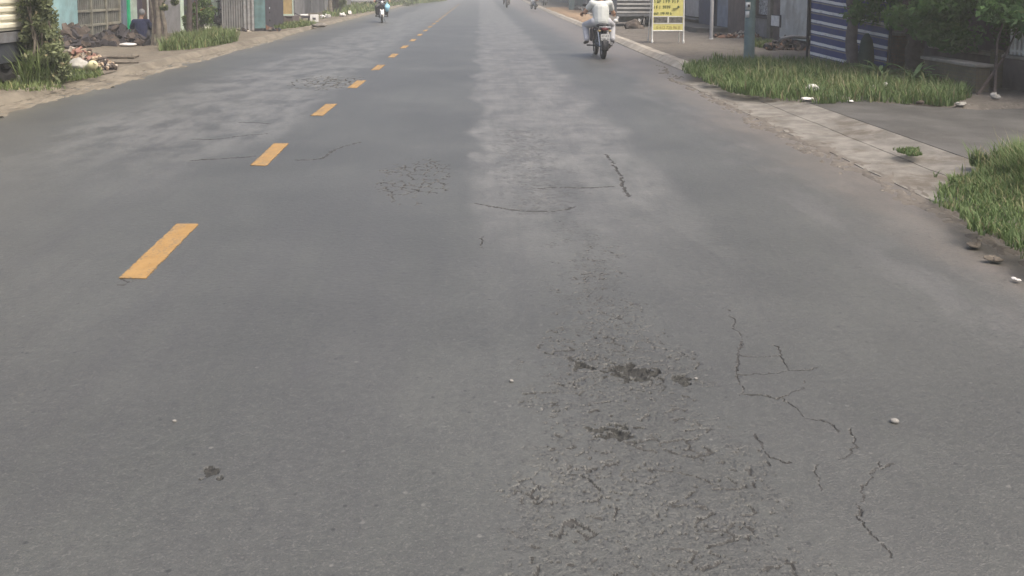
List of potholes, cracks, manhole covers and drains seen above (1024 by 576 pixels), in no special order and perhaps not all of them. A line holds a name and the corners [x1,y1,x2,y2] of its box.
crack [295,142,360,161]
pothole [583,423,648,444]
crack [474,130,894,576]
pothole [569,358,597,371]
pothole [592,358,664,384]
pothole [199,466,224,481]
crack [376,159,450,205]
pothole [671,375,692,387]
